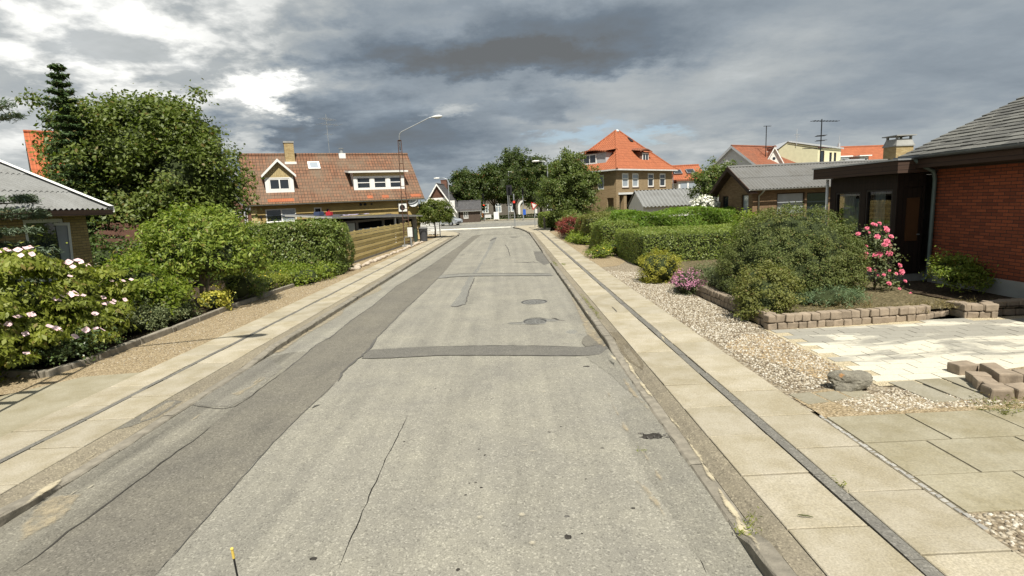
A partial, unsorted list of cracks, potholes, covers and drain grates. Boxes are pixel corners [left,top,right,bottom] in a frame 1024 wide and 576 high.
crack [16,384,334,573]
crack [339,415,408,567]
